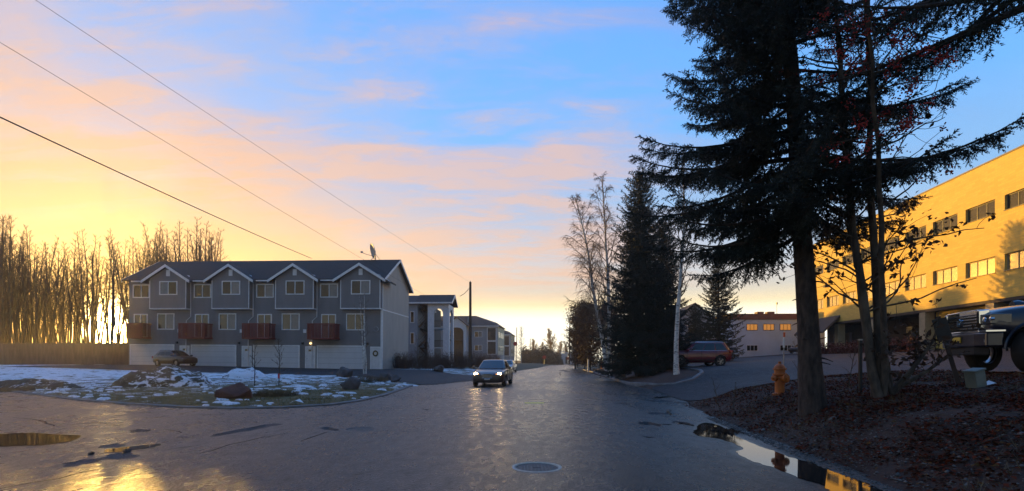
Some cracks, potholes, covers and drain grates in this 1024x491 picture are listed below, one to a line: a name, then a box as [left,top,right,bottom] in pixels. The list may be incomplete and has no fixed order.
manhole cover [512,462,562,473]
